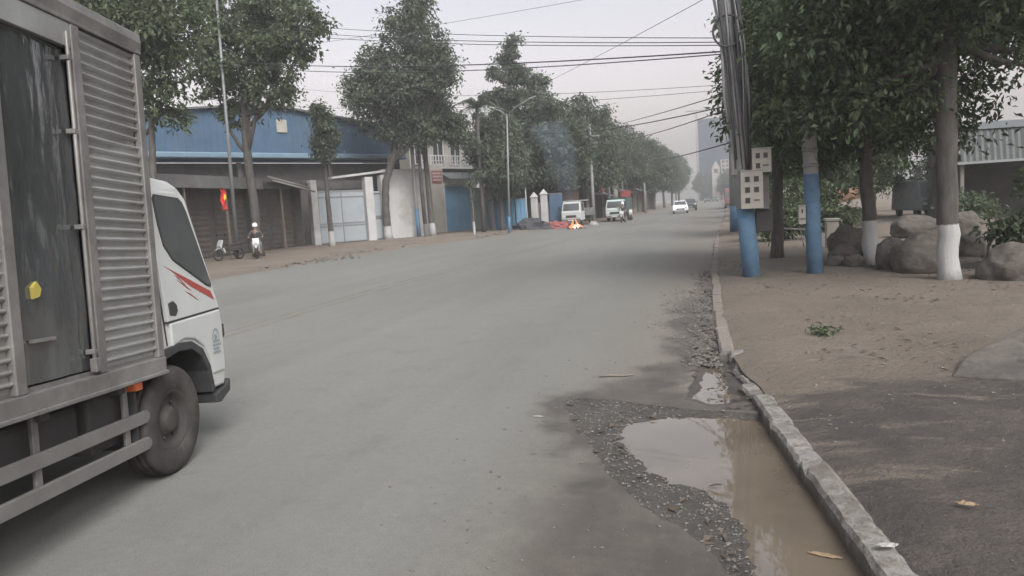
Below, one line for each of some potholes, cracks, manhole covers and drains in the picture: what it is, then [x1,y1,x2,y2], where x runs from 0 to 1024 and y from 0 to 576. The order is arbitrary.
pothole [563,398,762,576]
pothole [684,360,750,405]
